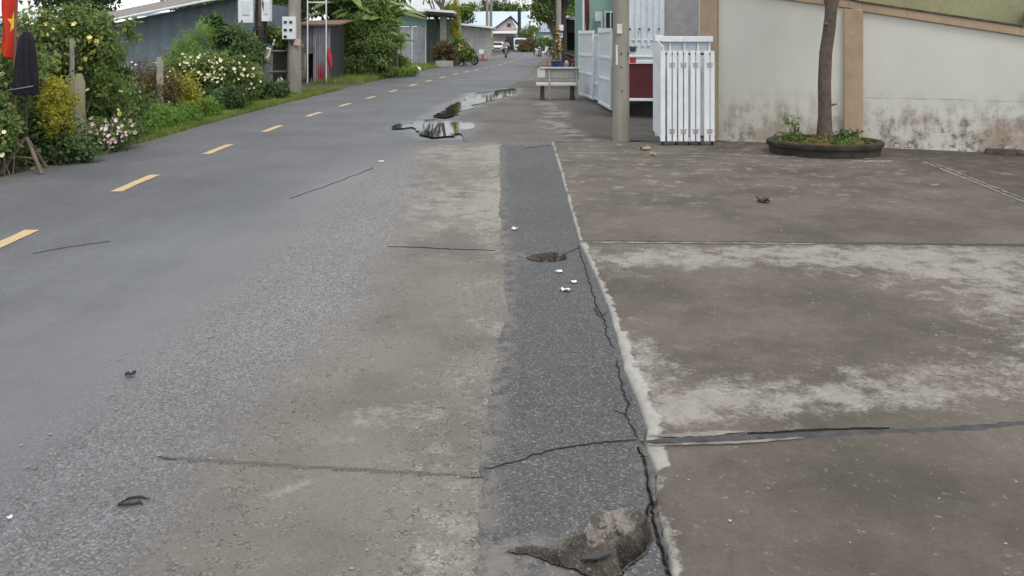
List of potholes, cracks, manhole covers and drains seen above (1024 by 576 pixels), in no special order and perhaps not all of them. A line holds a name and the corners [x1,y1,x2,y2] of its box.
pothole [525,252,567,262]
crack [483,246,672,576]
pothole [507,507,654,576]
